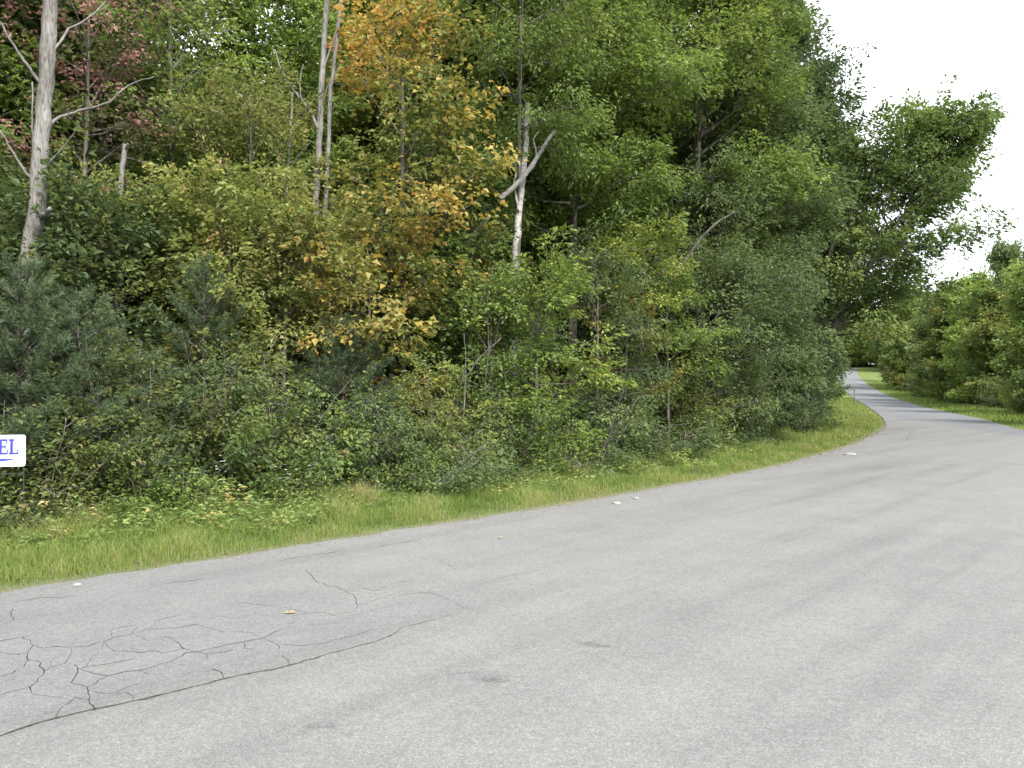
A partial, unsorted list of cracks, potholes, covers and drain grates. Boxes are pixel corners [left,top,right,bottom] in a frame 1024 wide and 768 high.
crack [239,550,463,624]
crack [0,614,451,736]
